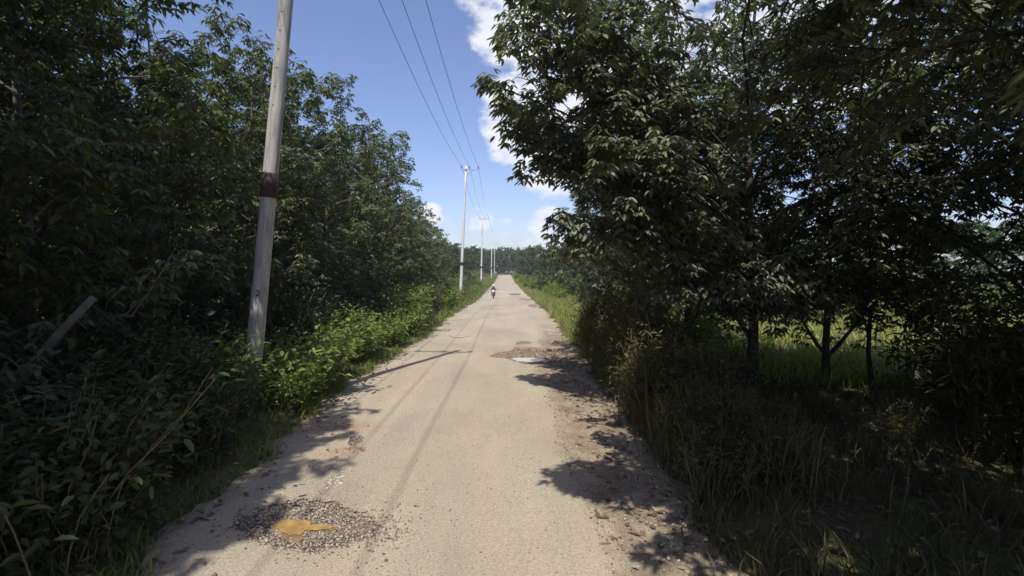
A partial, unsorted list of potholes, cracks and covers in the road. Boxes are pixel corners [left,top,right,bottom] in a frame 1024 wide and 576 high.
pothole [490,346,578,370]
pothole [207,491,397,567]
pothole [348,435,364,446]
